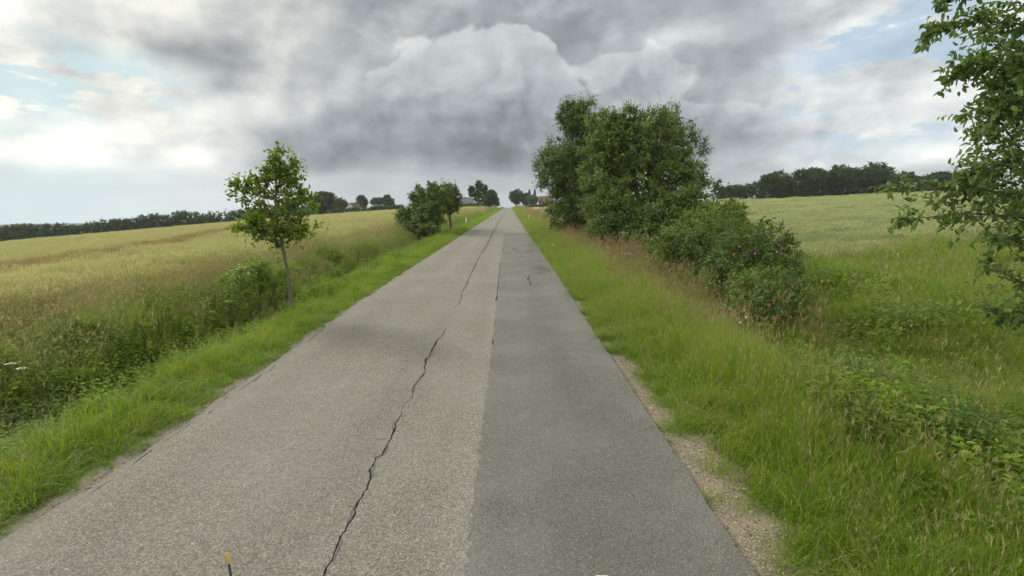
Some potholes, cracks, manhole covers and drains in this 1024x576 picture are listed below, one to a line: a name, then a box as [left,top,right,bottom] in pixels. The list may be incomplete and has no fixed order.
crack [323,328,446,576]
crack [453,216,503,346]
